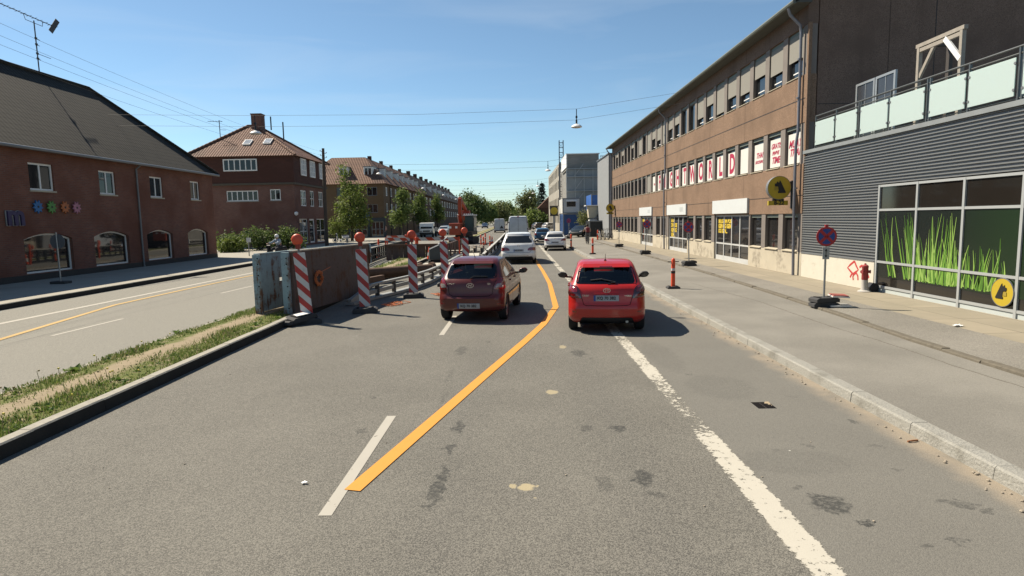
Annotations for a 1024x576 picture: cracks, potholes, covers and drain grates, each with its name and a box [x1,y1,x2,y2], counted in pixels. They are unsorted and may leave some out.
drain grate [751,401,776,409]
